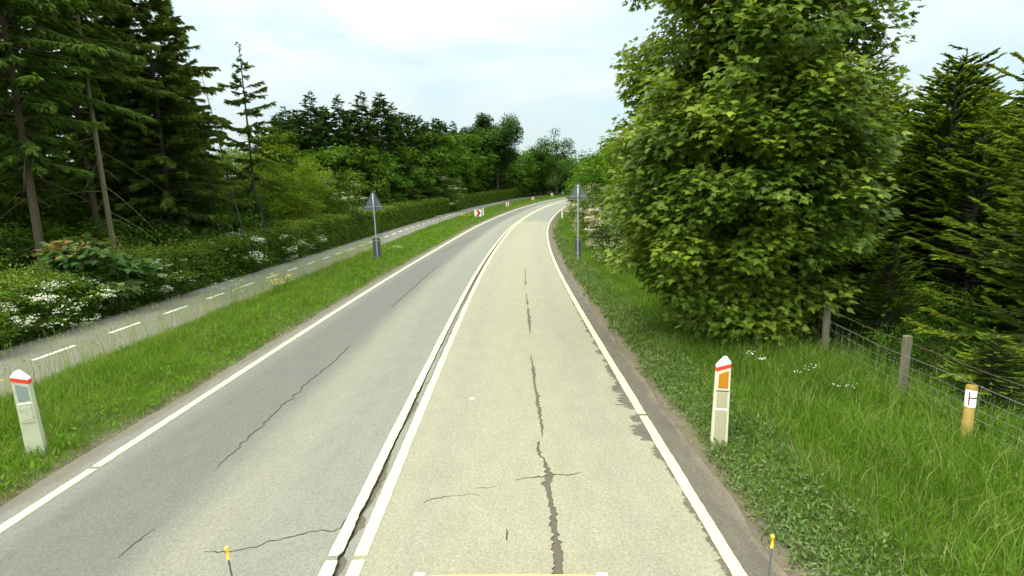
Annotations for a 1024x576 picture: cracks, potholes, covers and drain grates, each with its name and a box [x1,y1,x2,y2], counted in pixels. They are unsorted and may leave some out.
crack [214,346,349,471]
crack [204,518,347,553]
crack [517,356,581,575]
